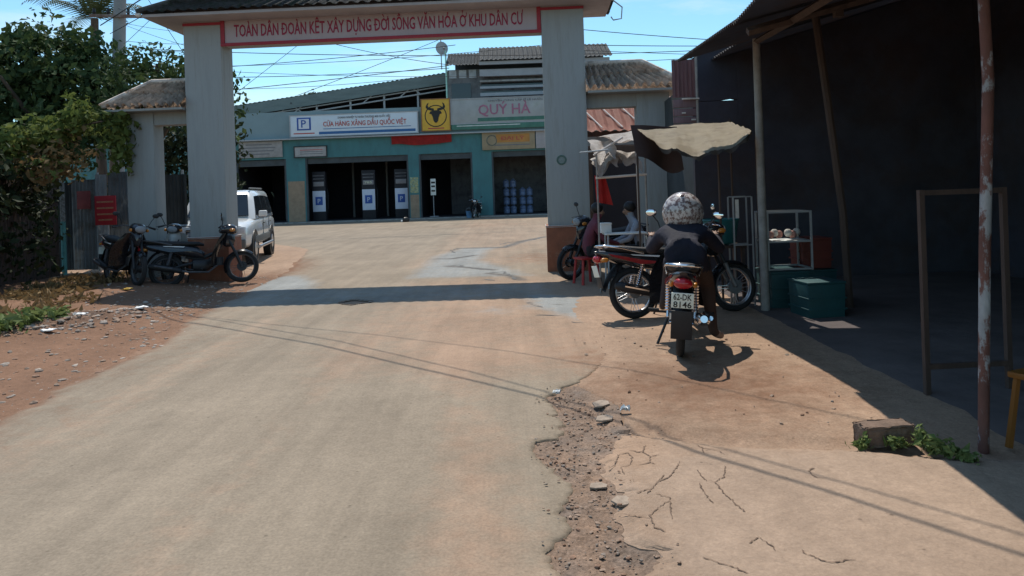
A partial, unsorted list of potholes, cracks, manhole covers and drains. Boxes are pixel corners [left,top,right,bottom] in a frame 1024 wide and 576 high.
crack [681,438,746,512]
crack [610,446,680,531]
pothole [533,386,662,576]
crack [704,537,775,573]
